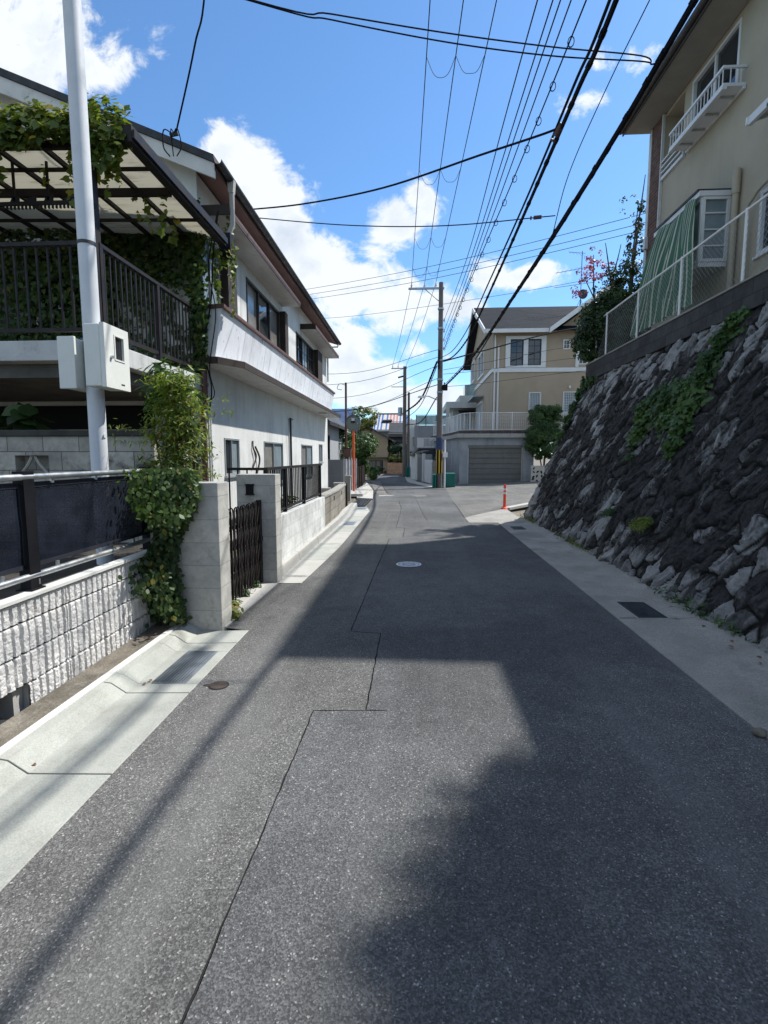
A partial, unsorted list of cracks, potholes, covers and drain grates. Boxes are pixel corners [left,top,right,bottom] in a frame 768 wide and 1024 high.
drain grate [618,602,668,618]
drain grate [152,650,218,684]
manhole cover [203,681,229,690]
